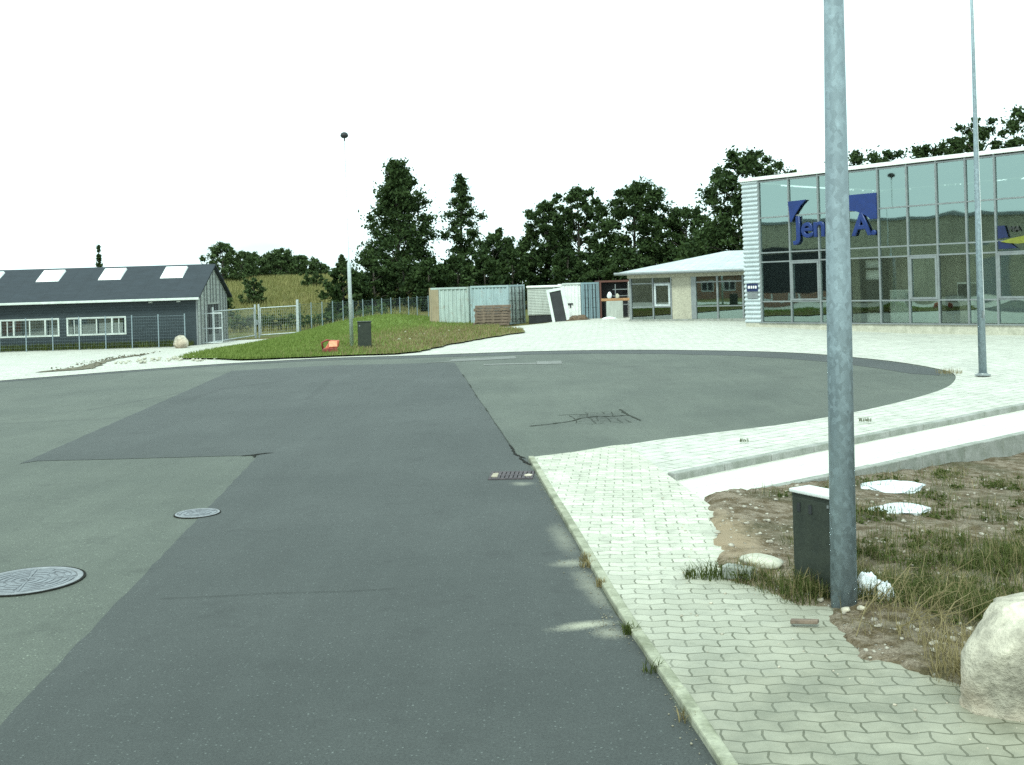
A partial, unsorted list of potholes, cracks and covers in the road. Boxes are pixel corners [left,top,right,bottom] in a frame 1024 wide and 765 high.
manhole cover [174,508,221,519]
manhole cover [0,566,86,597]
drain grate [488,471,535,480]
crack [532,409,641,426]
